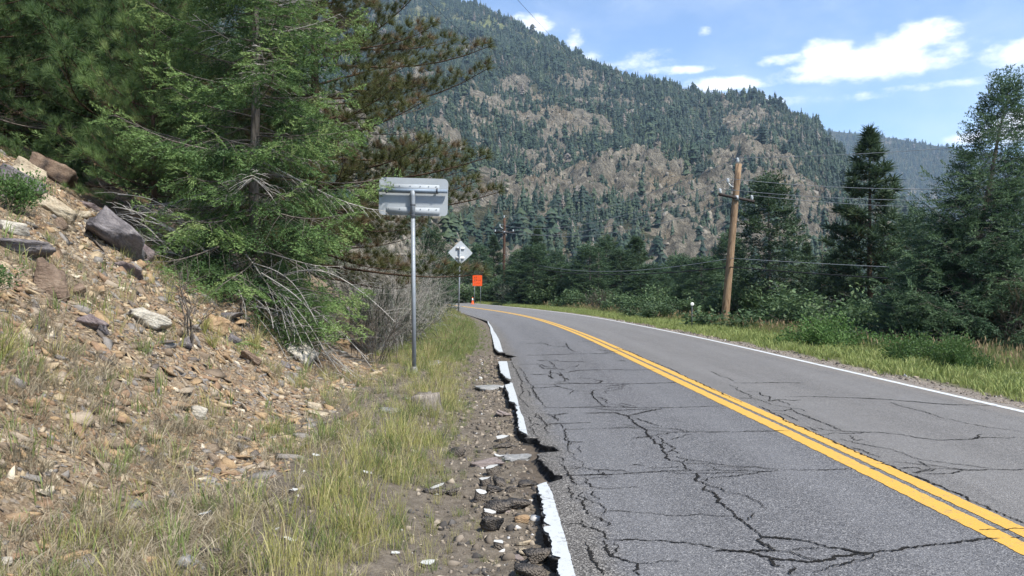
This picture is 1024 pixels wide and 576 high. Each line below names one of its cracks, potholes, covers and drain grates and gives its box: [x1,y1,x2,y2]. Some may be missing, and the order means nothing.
crack [512,341,1024,575]
